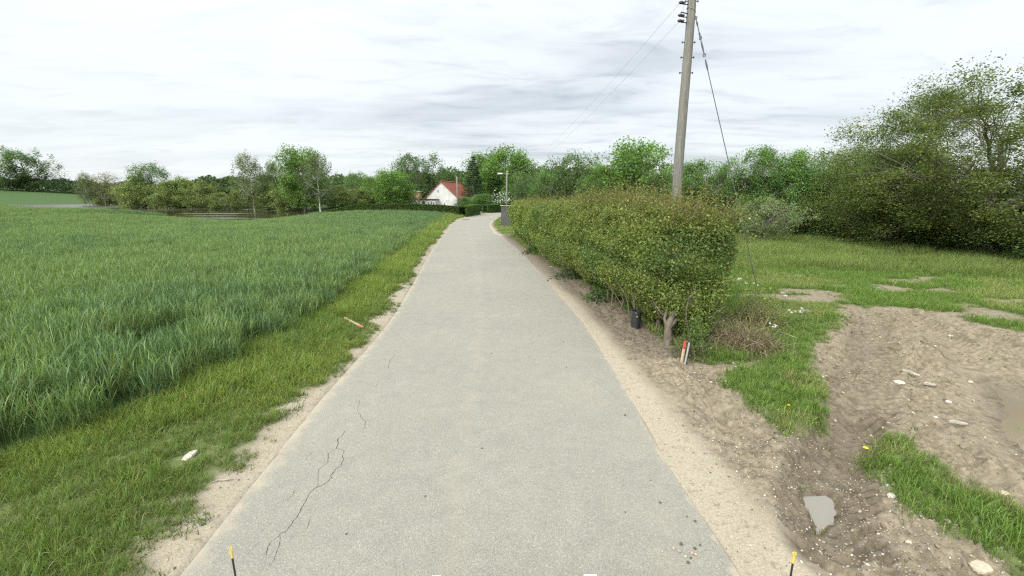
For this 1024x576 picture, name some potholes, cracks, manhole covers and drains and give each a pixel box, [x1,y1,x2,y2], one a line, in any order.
crack [253,431,345,565]
